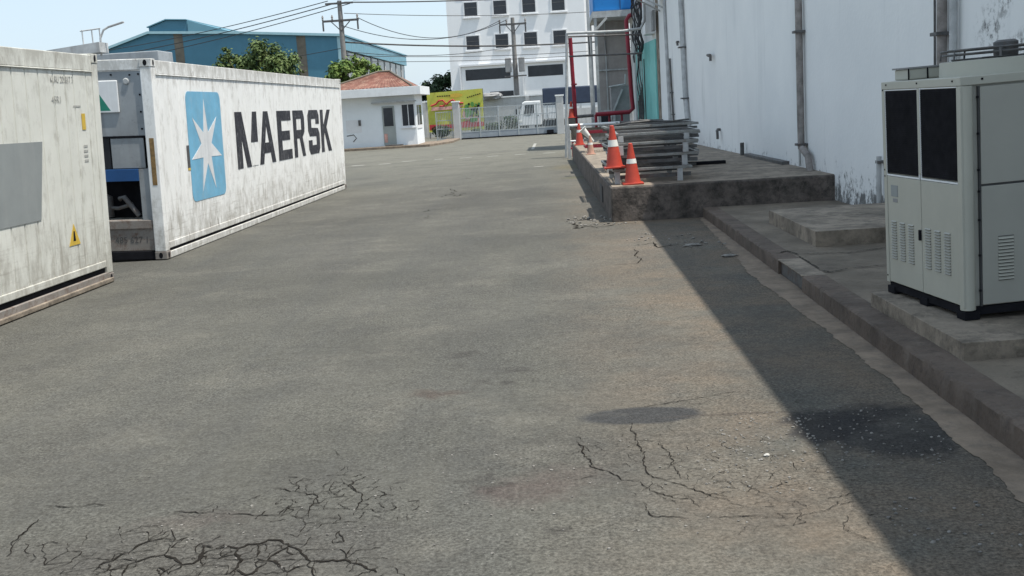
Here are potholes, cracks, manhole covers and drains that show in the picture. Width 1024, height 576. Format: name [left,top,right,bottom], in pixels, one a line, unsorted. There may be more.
crack [7,452,419,576]
crack [555,423,878,539]
